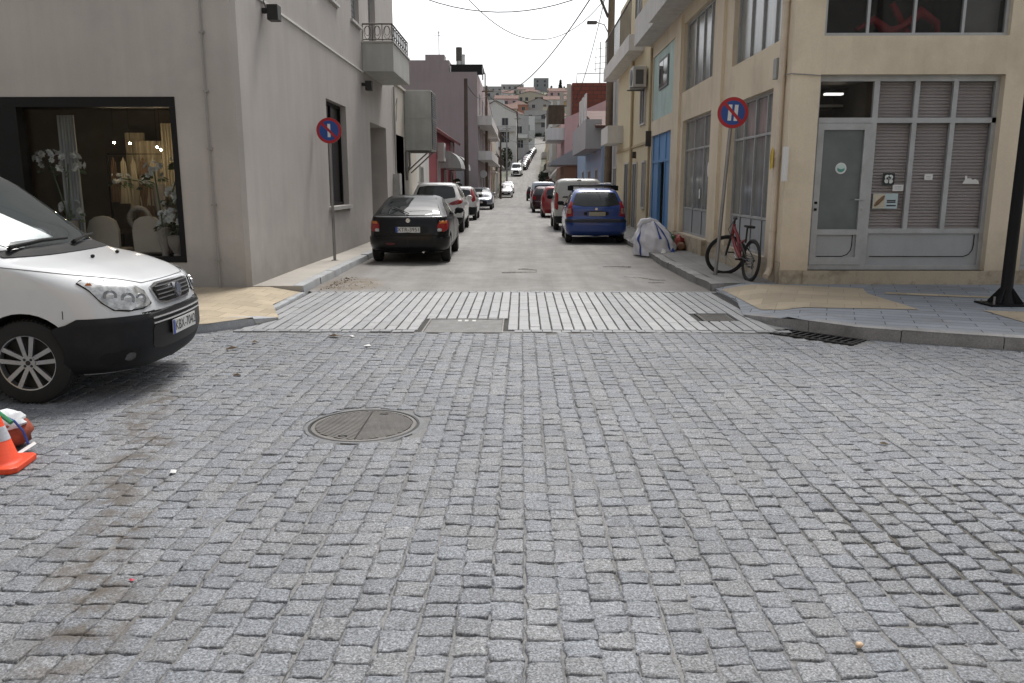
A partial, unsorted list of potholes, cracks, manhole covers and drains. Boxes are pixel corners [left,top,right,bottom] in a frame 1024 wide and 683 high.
drain grate [770,329,866,346]
manhole cover [694,313,738,322]
manhole cover [421,318,505,334]
manhole cover [303,409,426,445]
